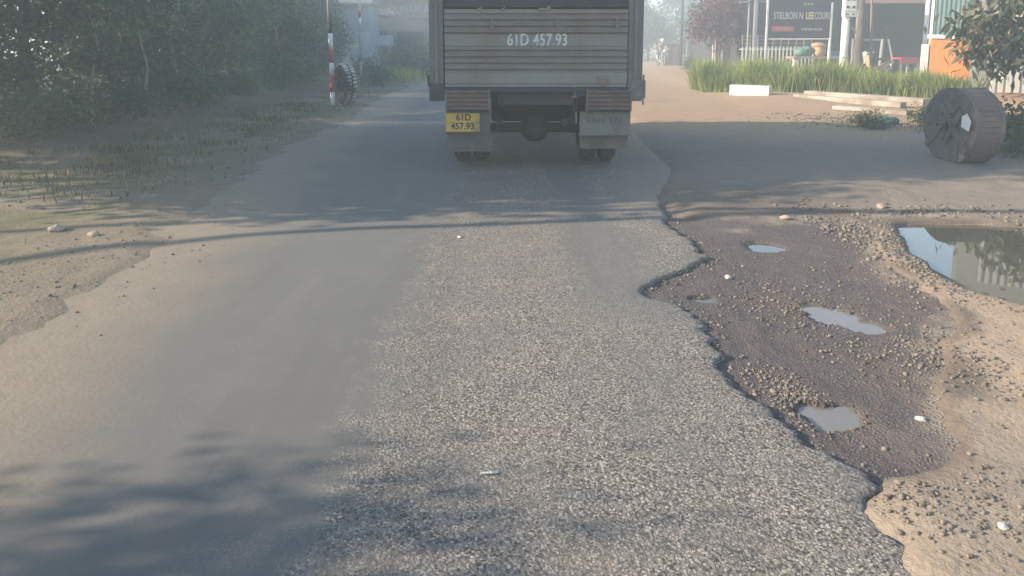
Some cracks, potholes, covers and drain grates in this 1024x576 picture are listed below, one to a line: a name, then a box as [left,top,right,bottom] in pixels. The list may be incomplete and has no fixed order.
pothole [898,223,1024,305]
pothole [641,214,961,487]
